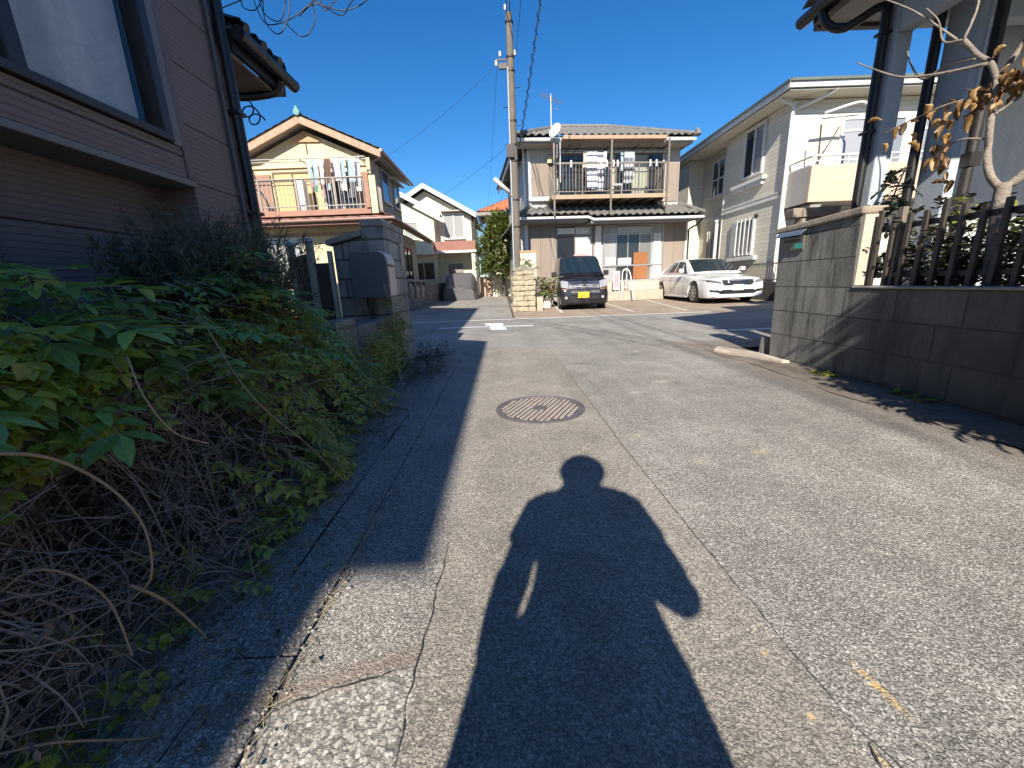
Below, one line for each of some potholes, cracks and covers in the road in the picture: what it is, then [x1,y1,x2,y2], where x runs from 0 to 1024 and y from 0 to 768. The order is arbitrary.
manhole cover [496,396,585,424]
crack [268,543,449,768]
